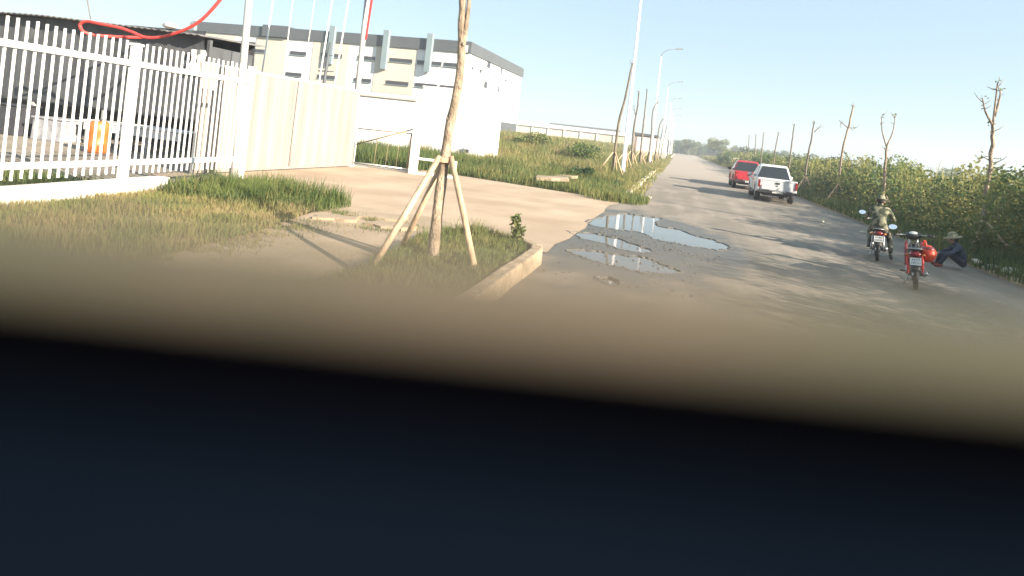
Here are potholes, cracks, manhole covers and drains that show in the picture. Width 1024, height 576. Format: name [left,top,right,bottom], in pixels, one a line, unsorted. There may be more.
pothole [565,249,685,275]
pothole [566,230,657,253]
pothole [584,213,734,251]
